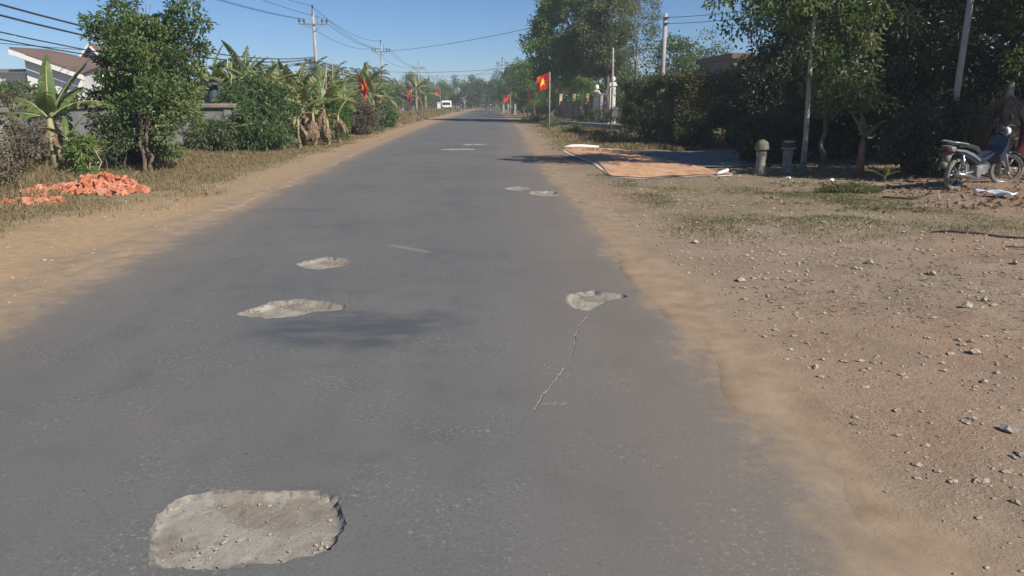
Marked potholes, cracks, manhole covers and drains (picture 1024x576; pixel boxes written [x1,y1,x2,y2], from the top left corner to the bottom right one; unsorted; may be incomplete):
pothole [566,290,628,311]
pothole [236,299,346,318]
pothole [296,257,351,269]
crack [534,313,590,411]
pothole [148,489,347,571]
